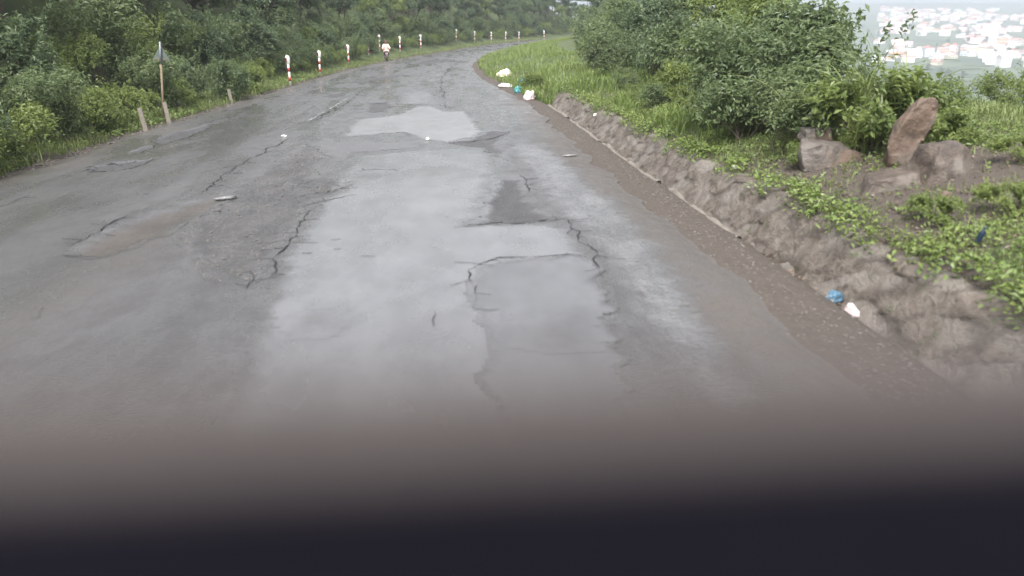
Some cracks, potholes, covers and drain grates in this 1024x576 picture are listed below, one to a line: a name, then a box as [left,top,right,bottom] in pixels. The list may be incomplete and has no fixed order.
pothole [468,177,557,225]
crack [235,169,393,288]
crack [452,217,605,310]
crack [201,139,286,194]
pothole [59,189,241,259]
pothole [87,159,152,172]
pothole [364,102,393,113]
